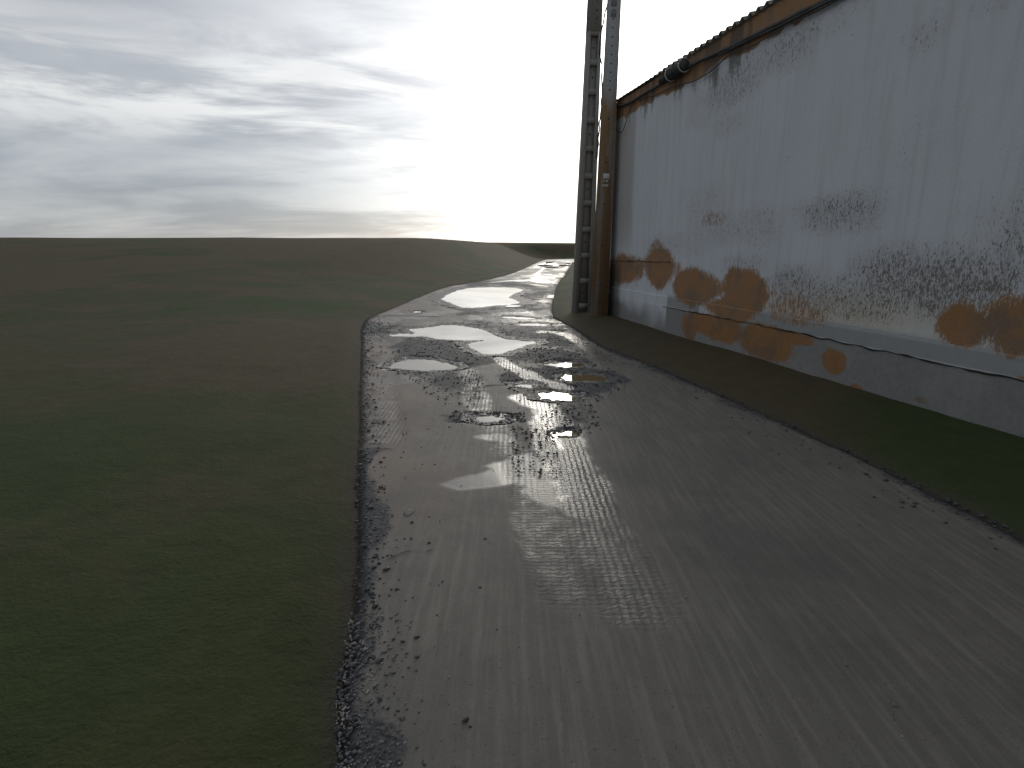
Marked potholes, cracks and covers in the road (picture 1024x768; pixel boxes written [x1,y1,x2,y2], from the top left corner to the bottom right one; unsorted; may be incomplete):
pothole [537,360,597,369]
pothole [552,372,621,383]
pothole [460,410,522,426]
pothole [551,427,580,438]
